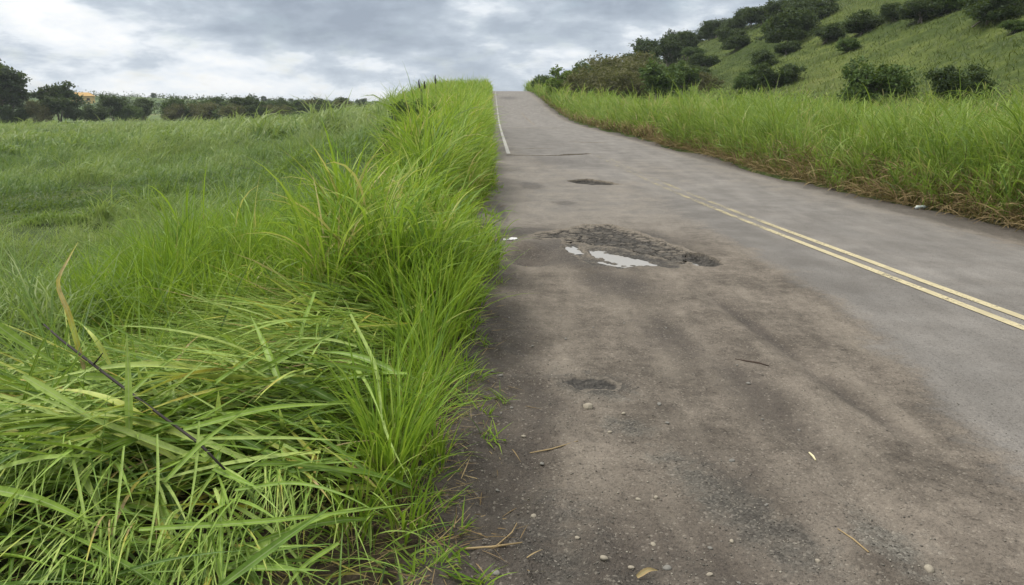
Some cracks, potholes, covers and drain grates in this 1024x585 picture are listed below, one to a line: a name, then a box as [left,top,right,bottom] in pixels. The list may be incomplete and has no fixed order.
pothole [559,242,685,269]
pothole [552,373,622,393]
pothole [683,252,724,267]
